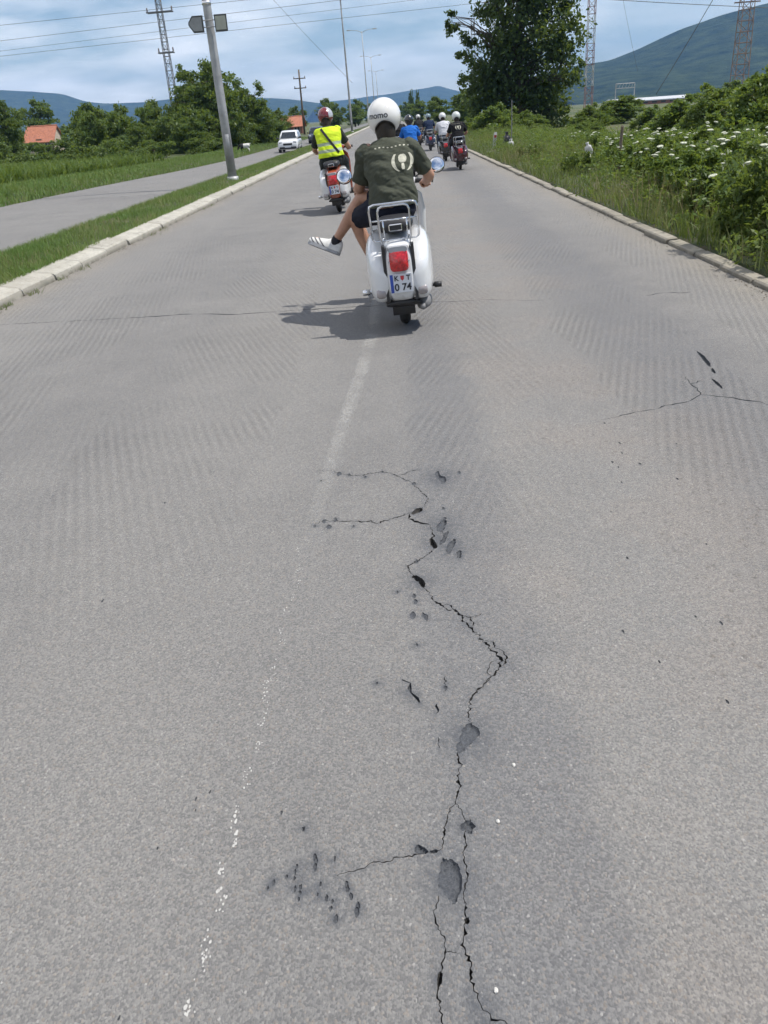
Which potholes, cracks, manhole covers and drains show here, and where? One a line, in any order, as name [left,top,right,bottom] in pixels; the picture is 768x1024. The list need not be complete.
pothole [456,723,480,753]
crack [601,377,768,420]
pothole [460,820,476,834]
crack [315,470,508,1024]
pothole [438,858,462,904]
